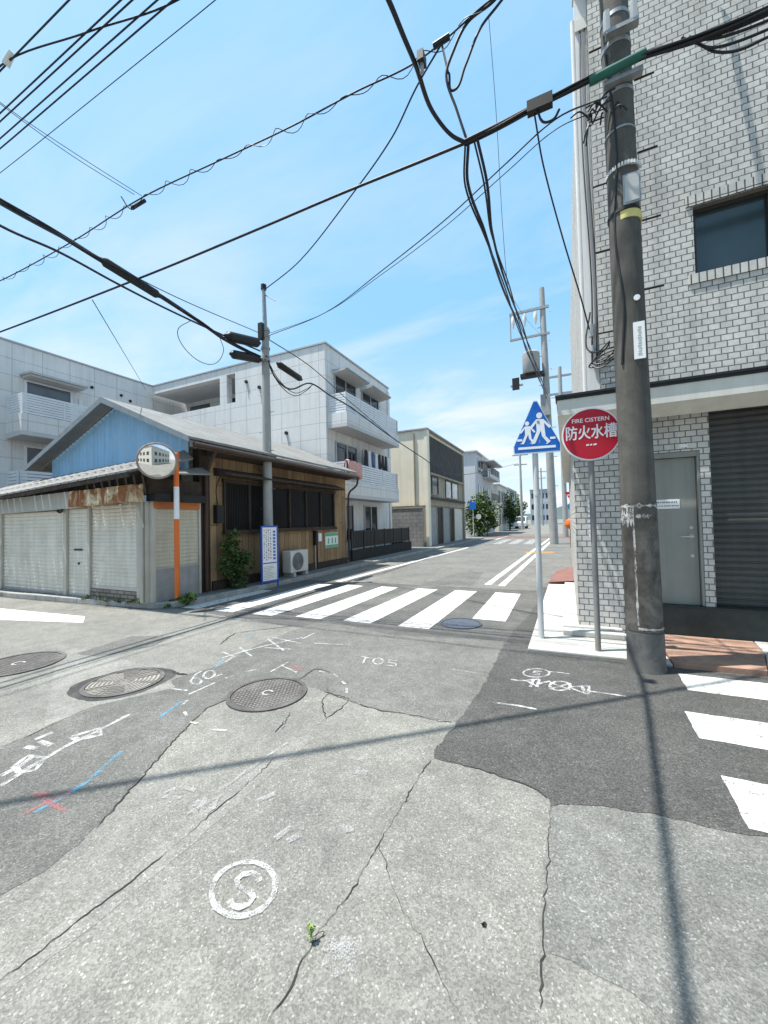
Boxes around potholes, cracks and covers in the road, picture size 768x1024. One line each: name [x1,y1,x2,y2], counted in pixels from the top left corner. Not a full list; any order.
crack [300,669,449,726]
crack [381,852,461,1016]
crack [438,756,551,1007]
manhole cover [440,618,482,629]
manhole cover [79,668,165,698]
crack [99,699,226,824]
manhole cover [226,677,307,713]
manhole cover [0,651,67,677]
crack [0,757,276,980]
